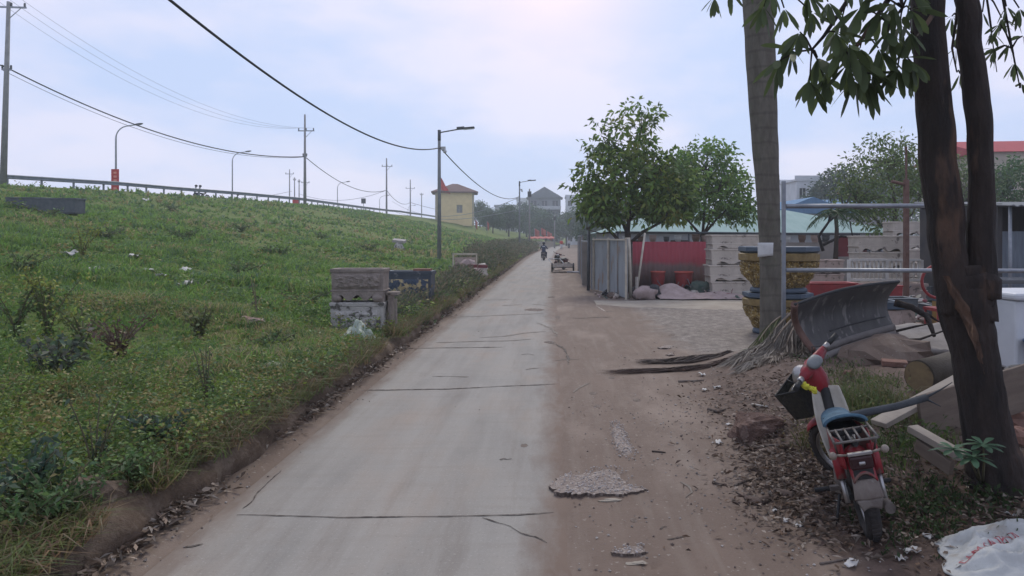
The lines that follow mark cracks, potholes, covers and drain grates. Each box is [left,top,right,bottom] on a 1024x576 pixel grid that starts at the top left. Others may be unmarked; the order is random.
crack [436,323,571,370]
